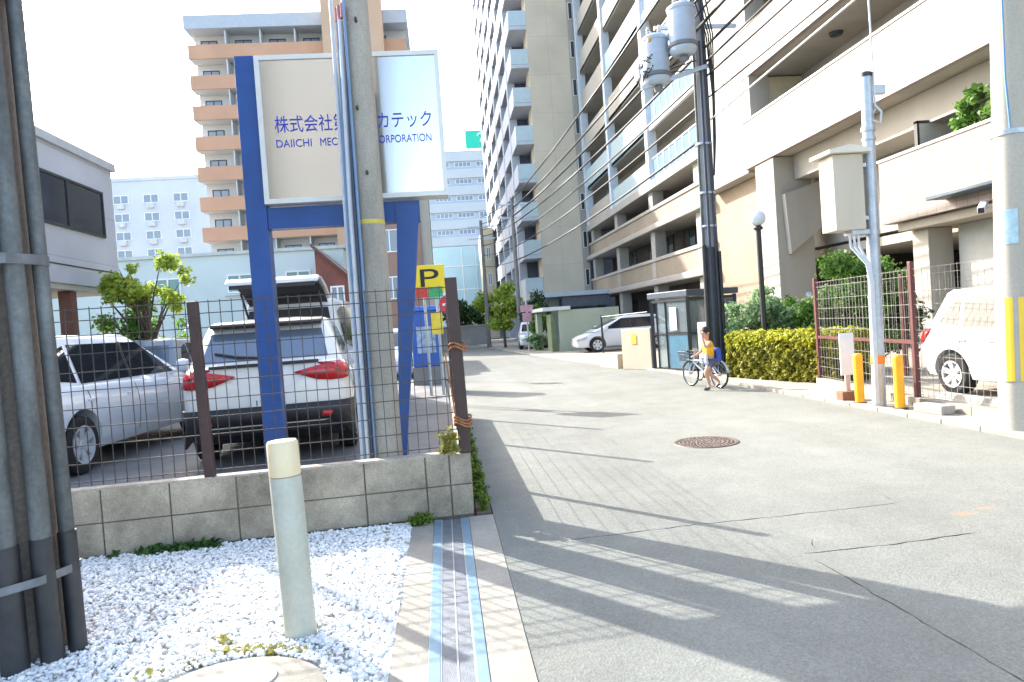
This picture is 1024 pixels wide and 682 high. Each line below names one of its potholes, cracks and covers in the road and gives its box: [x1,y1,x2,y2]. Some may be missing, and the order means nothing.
crack [812,534,1024,682]
manhole cover [673,436,740,448]
